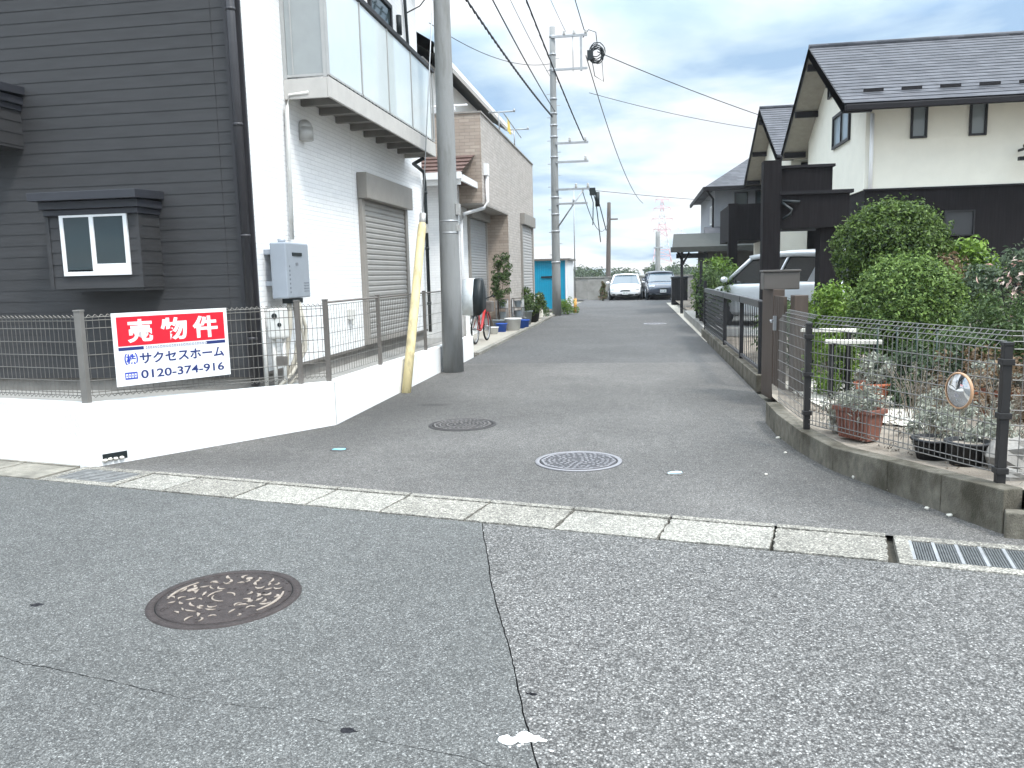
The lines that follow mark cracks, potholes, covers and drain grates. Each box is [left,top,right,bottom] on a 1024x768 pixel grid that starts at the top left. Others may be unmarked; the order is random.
manhole cover [145,570,302,630]
drain grate [39,466,156,487]
manhole cover [428,418,496,431]
manhole cover [535,451,623,472]
drain grate [893,535,1024,576]
crack [1,656,503,768]
